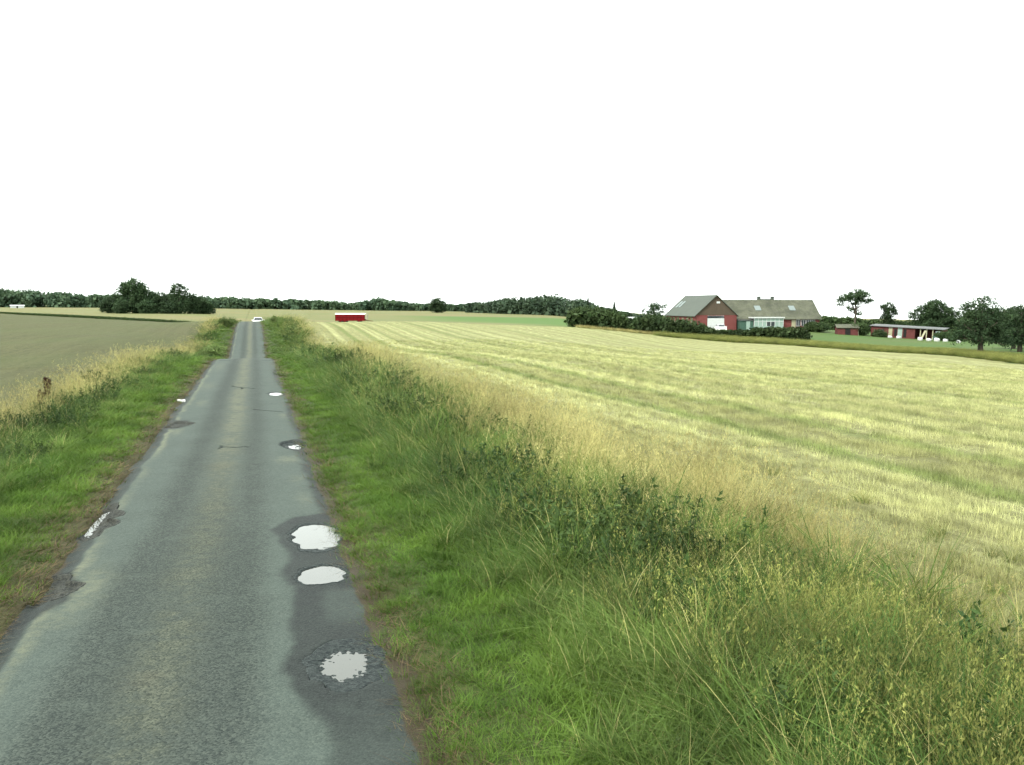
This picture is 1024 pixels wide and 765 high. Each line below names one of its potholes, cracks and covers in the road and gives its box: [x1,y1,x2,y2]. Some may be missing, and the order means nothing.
pothole [278,440,307,450]
pothole [287,523,343,553]
pothole [26,574,87,609]
pothole [293,563,350,585]
pothole [162,421,196,429]
pothole [301,638,386,693]
pothole [79,502,126,541]
